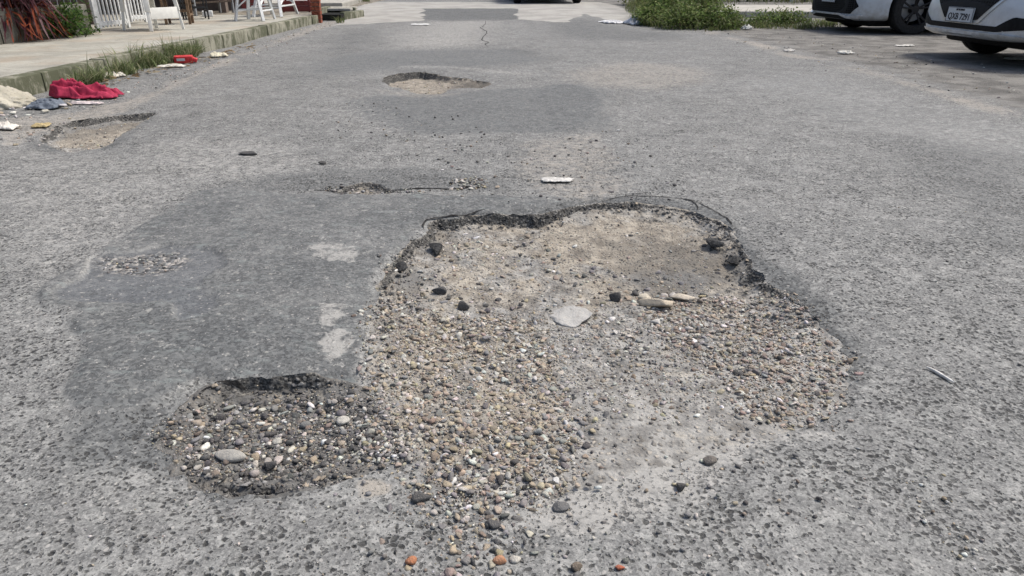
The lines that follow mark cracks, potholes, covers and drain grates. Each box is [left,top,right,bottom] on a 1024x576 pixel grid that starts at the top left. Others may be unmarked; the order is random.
pothole [337,182,392,195]
pothole [382,72,492,95]
pothole [39,112,156,153]
pothole [155,372,388,499]
pothole [365,202,853,501]
